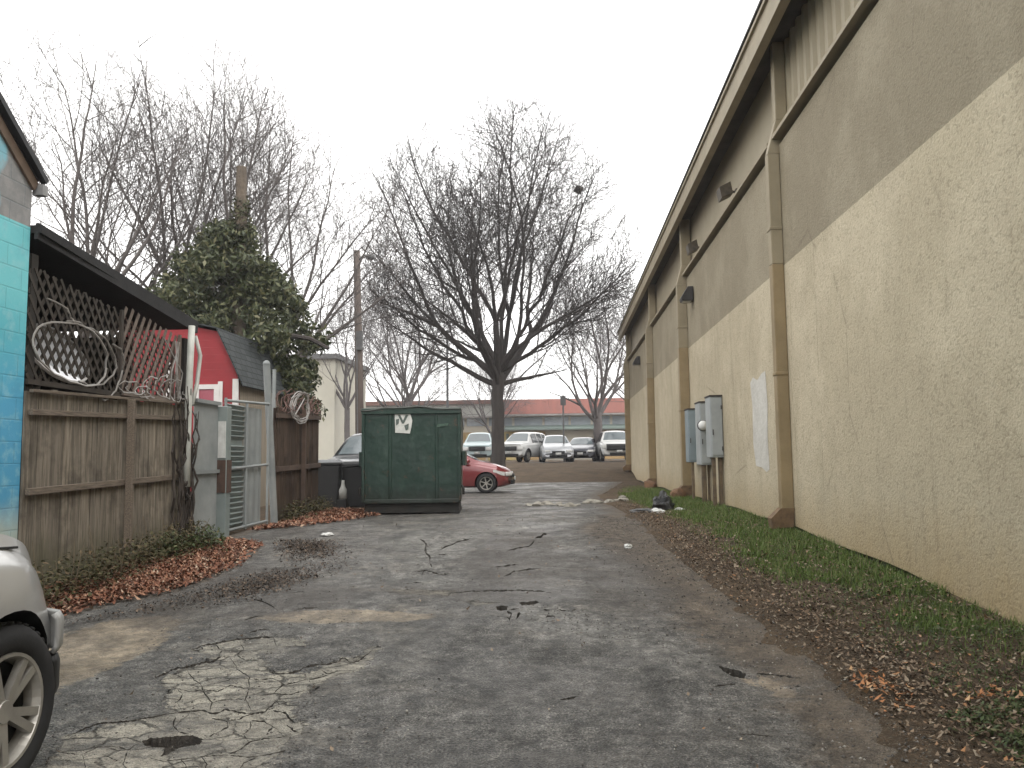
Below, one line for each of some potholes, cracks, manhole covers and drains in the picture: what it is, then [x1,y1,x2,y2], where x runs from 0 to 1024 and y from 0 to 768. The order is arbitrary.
crack [456,541,577,632]
crack [413,539,469,583]
crack [65,591,371,768]
pothole [719,666,746,678]
pothole [142,735,203,756]
